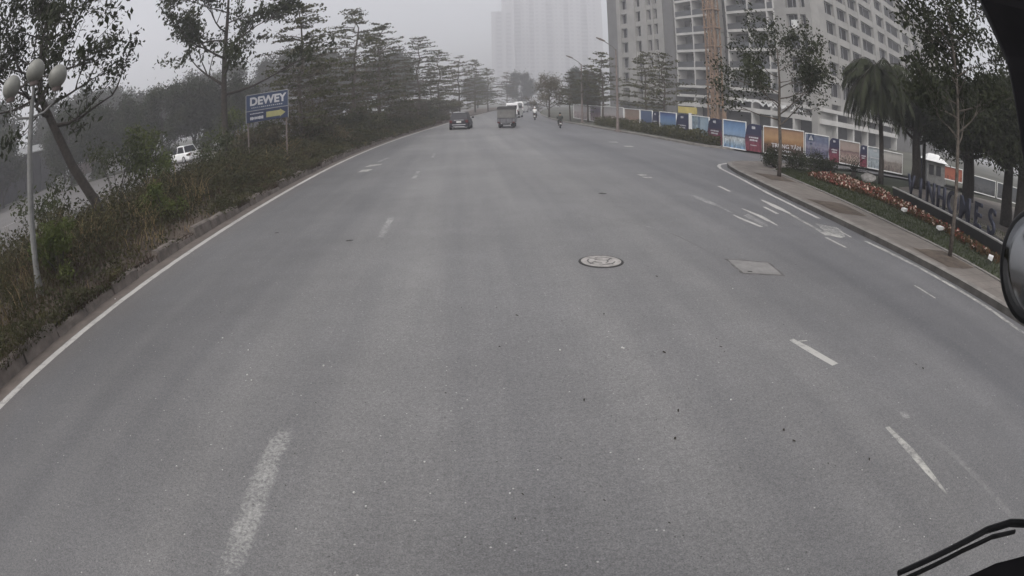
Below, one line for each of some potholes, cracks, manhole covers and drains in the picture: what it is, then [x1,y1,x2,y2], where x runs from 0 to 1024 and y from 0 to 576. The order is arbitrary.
manhole cover [725,259,785,276]
manhole cover [578,255,624,268]
